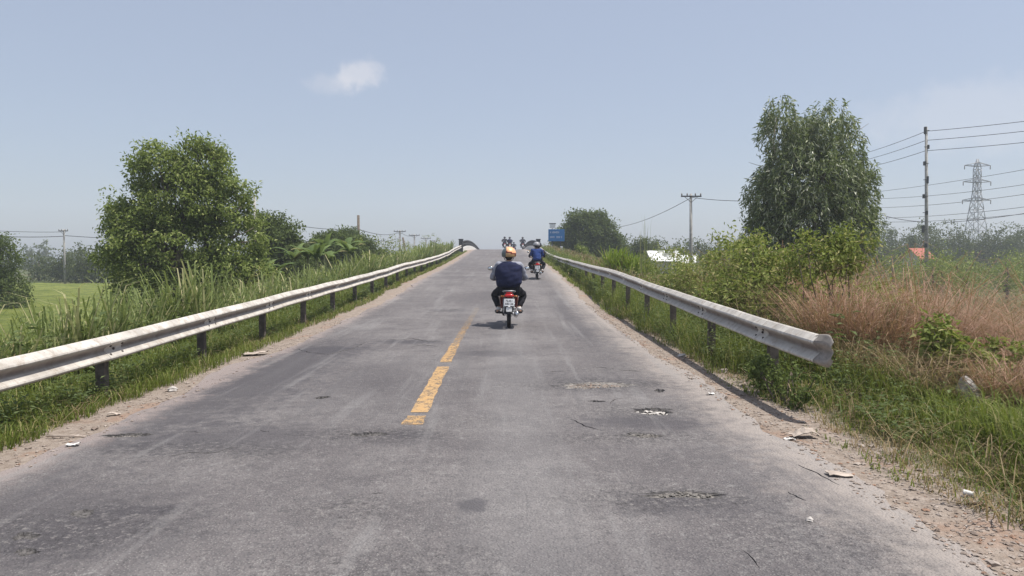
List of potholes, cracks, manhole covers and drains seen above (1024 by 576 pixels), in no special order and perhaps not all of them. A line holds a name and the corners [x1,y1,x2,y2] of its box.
crack [788,465,839,501]
pothole [638,490,727,499]
